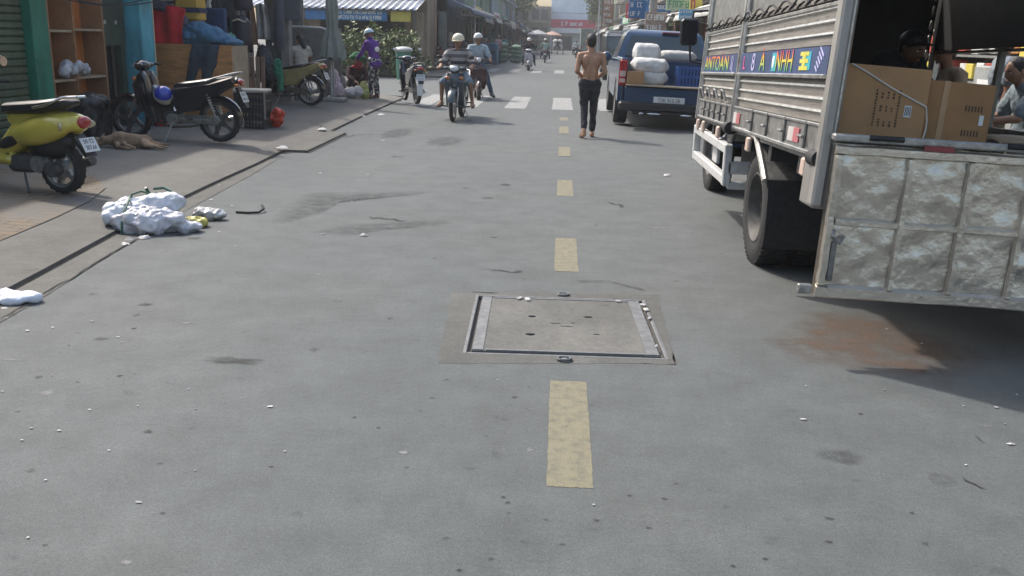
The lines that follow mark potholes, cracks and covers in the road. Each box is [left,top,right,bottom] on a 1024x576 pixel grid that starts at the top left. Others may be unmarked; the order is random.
manhole cover [438,292,675,365]
